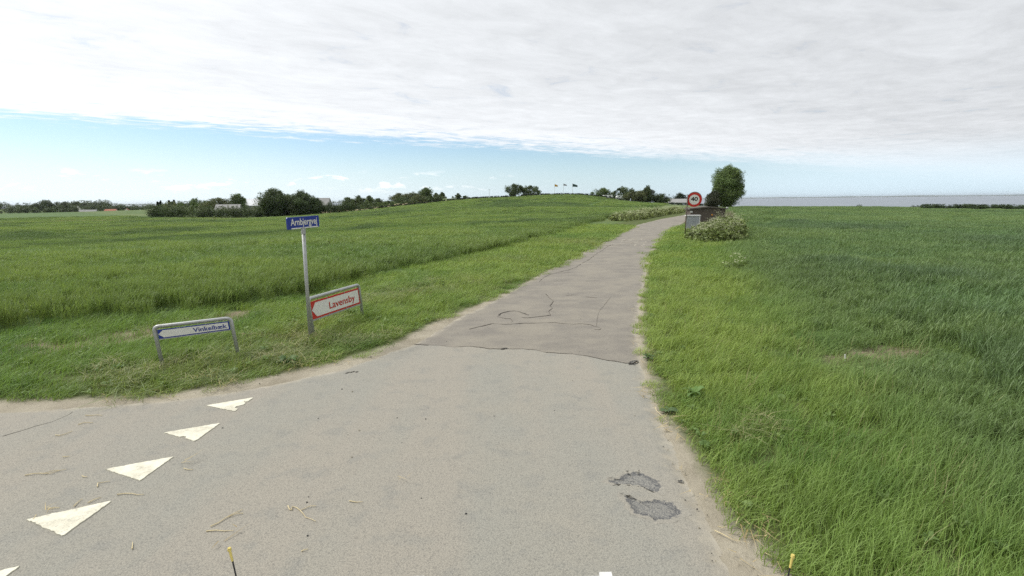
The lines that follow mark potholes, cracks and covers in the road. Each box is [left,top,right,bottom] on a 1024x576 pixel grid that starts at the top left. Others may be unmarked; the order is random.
crack [471,238,652,330]
